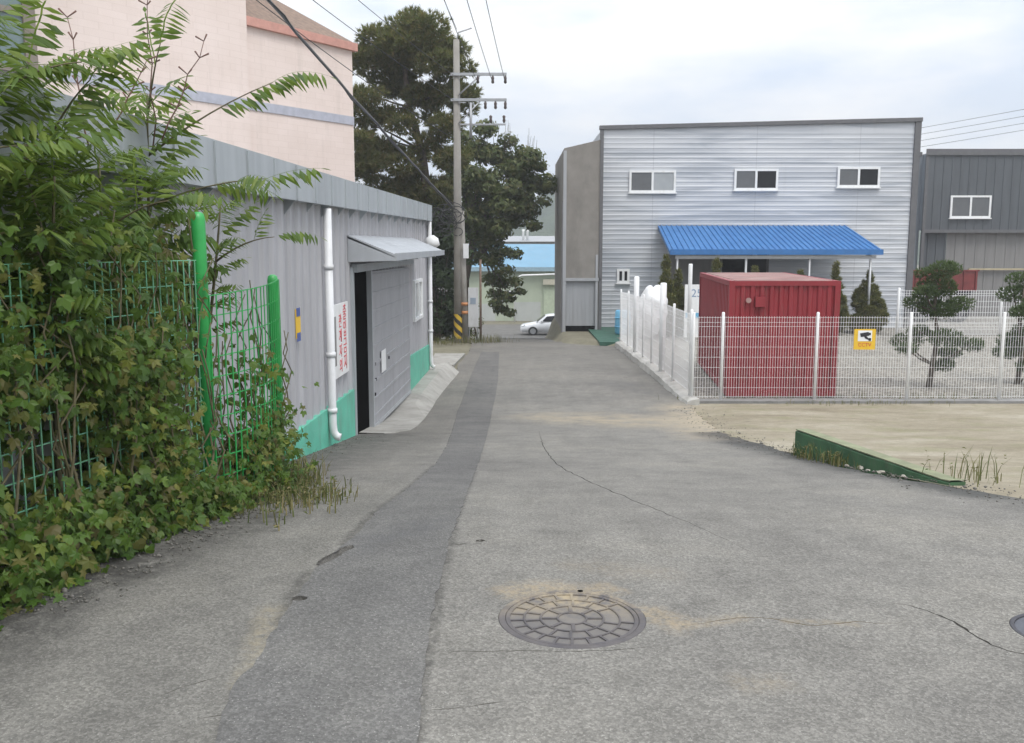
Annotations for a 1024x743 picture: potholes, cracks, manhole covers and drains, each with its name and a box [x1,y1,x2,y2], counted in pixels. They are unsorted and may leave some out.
crack [539,433,753,553]
crack [901,604,1024,654]
crack [683,617,900,626]
manhole cover [499,590,646,649]
pothole [316,545,354,565]
manhole cover [1010,614,1024,636]
